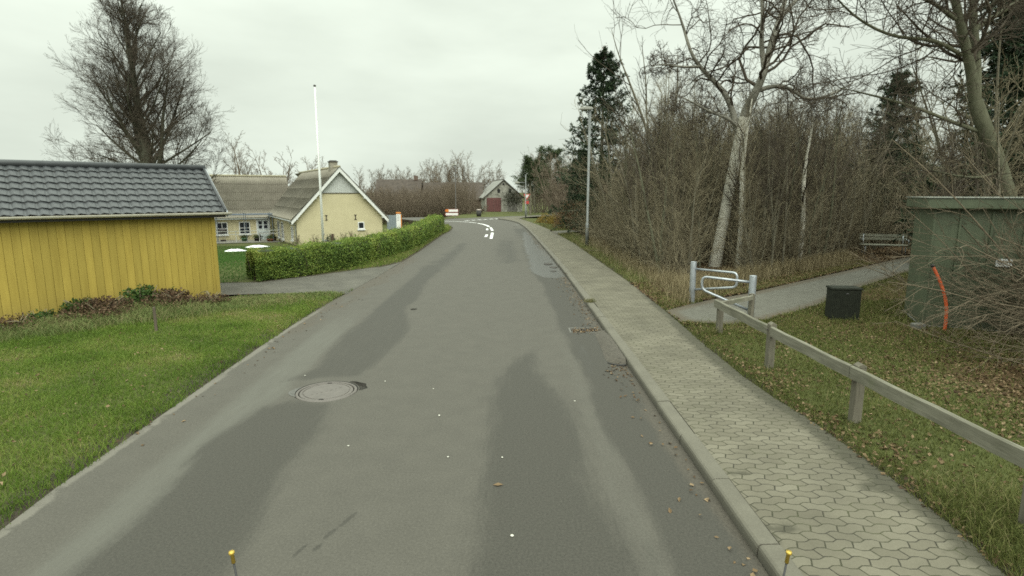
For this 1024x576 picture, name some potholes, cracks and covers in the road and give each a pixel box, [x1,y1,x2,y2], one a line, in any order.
manhole cover [288,381,358,402]
